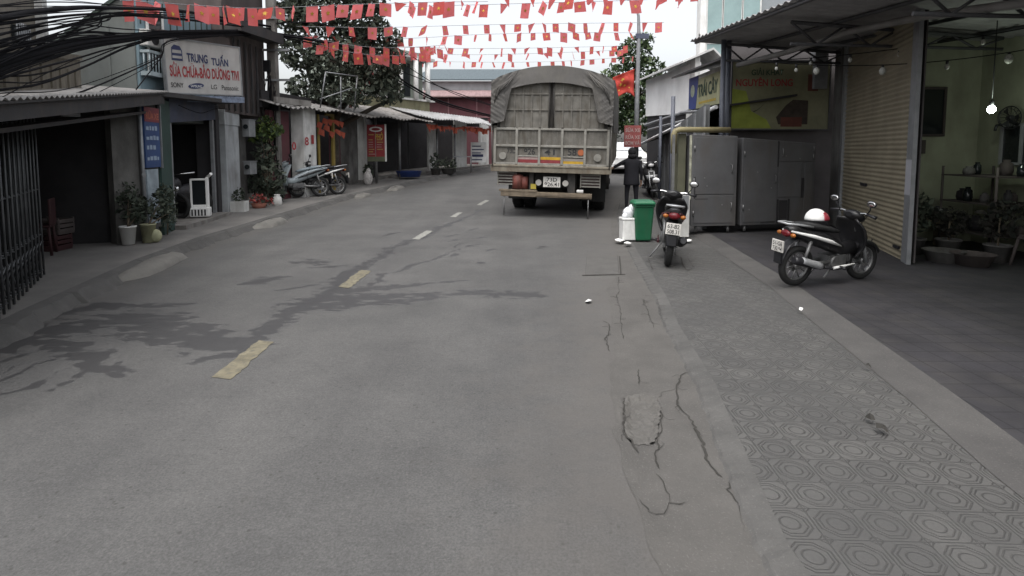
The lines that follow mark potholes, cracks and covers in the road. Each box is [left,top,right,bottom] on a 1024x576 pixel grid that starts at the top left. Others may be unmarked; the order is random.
crack [640,475,685,514]
crack [621,369,722,477]
pothole [623,393,662,445]
crack [603,277,626,350]
